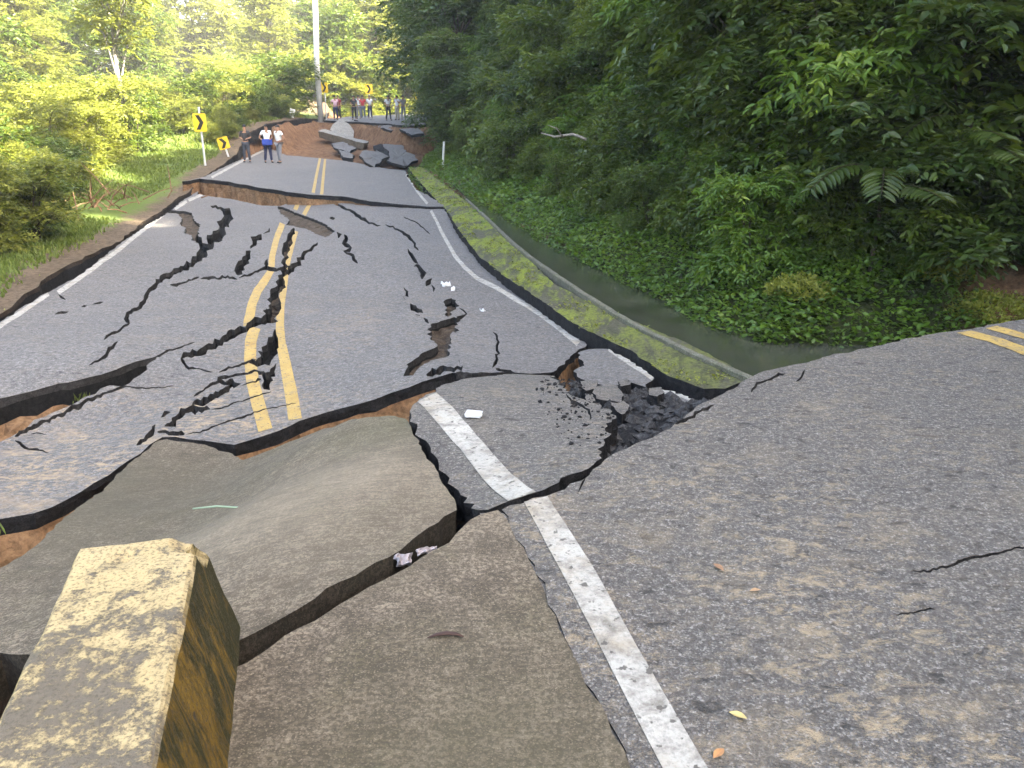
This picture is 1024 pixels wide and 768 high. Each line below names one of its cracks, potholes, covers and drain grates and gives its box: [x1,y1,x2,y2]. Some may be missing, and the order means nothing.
crack [914,546,1024,573]
crack [0,205,318,453]
crack [751,370,805,392]
